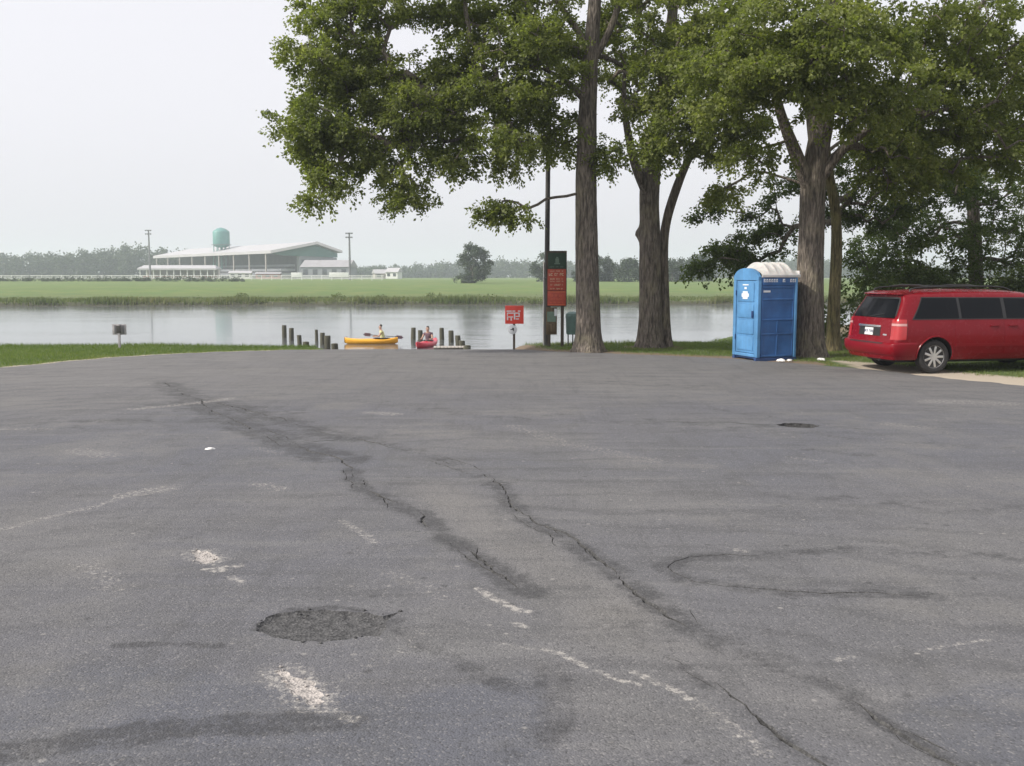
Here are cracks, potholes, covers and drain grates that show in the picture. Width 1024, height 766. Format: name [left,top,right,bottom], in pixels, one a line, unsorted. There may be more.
pothole [256,608,402,644]
crack [165,383,932,627]
crack [851,700,964,766]
crack [664,656,827,766]
